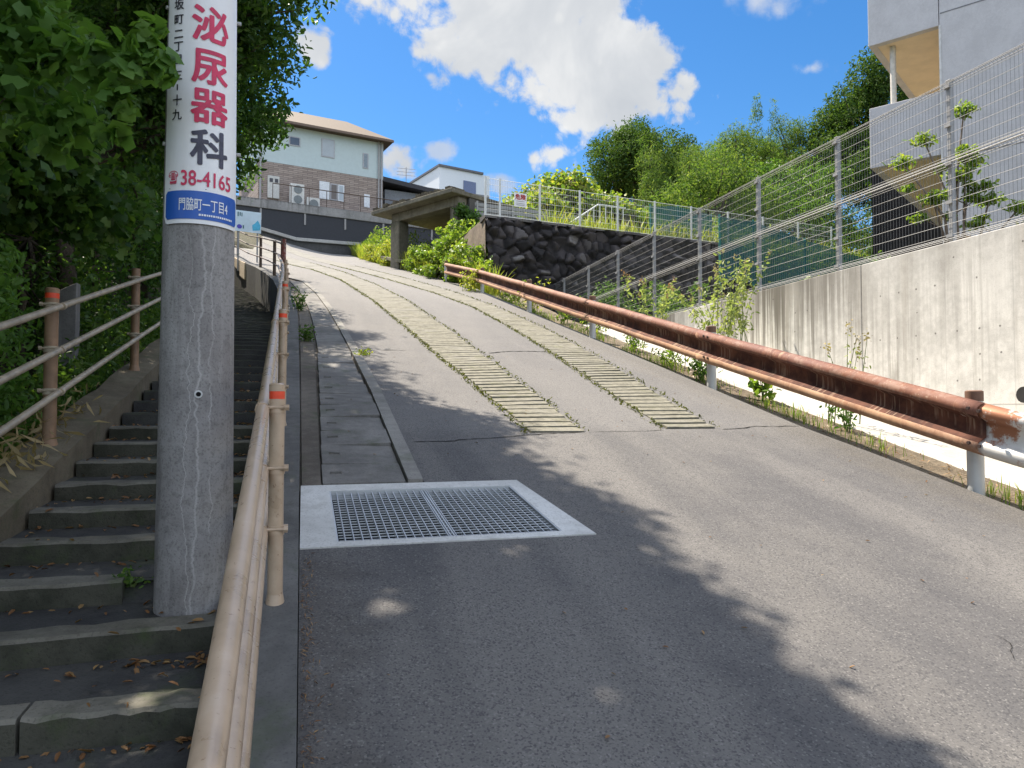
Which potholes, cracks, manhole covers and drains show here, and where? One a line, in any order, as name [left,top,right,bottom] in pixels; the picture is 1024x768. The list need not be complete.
crack [416,426,780,442]
drain grate [300,480,596,550]
